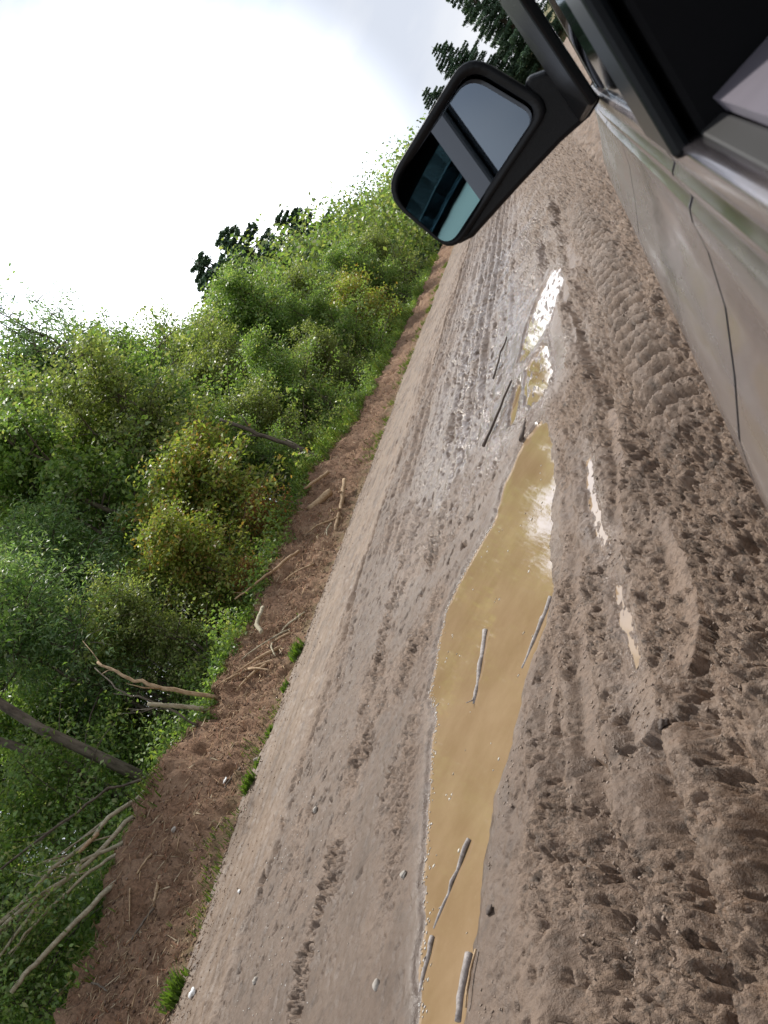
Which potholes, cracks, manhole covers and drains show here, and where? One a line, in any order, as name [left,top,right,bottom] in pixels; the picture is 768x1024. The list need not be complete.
pothole [404,406,566,1024]
